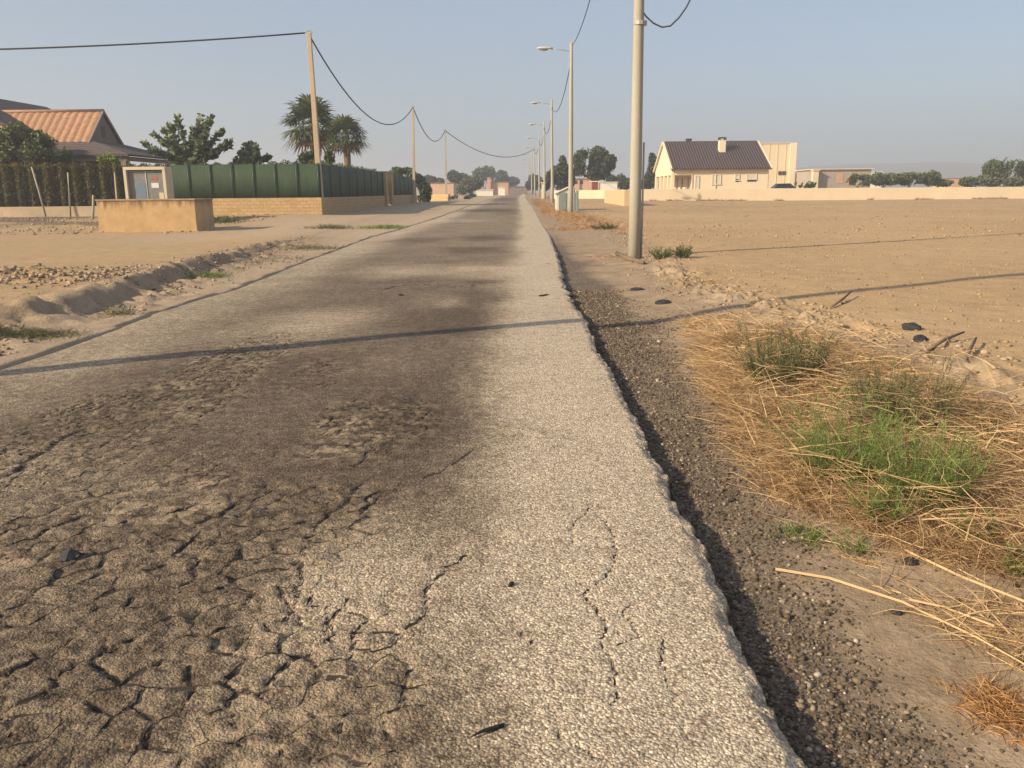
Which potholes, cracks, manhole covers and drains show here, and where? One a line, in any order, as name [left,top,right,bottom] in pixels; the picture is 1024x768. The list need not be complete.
crack [0,394,468,768]
crack [583,520,676,706]
crack [97,355,446,503]
